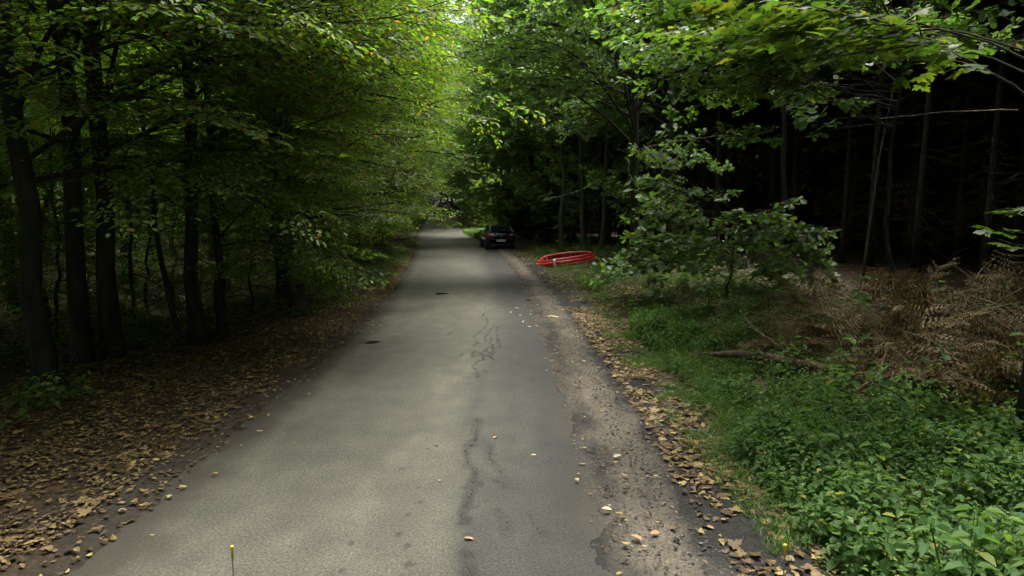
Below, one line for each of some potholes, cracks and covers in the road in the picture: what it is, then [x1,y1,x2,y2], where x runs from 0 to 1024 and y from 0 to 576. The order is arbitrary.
crack [460,426,508,531]
